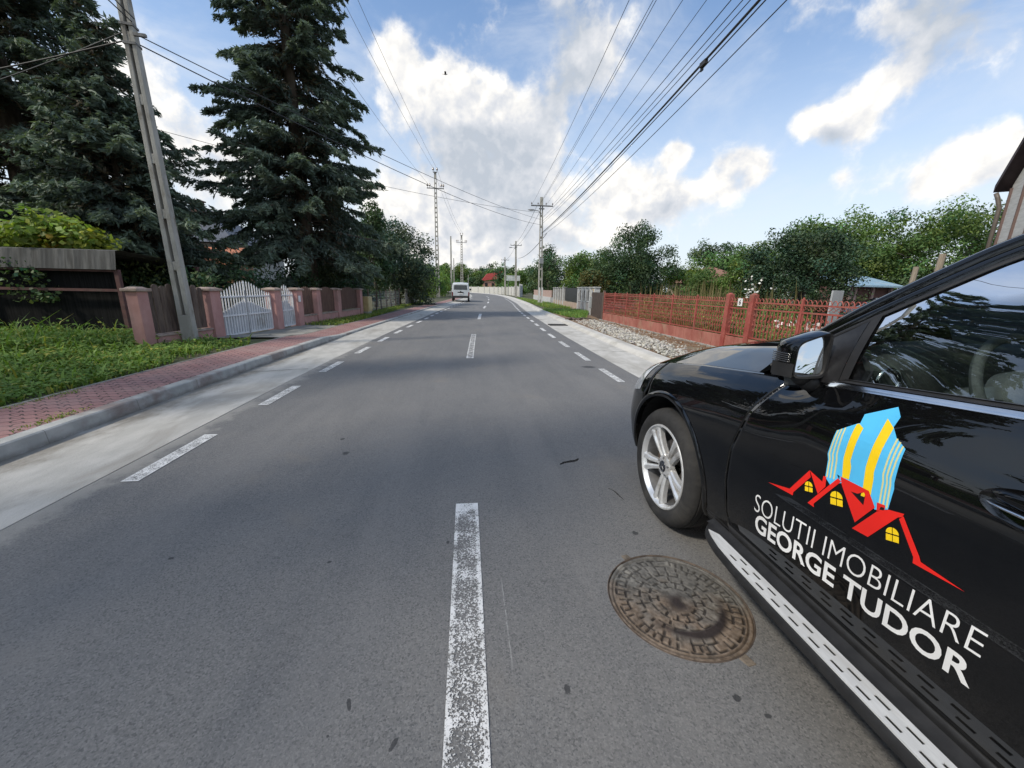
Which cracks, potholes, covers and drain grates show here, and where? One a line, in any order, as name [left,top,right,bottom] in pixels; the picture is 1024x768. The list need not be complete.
manhole cover [607,554,756,667]
